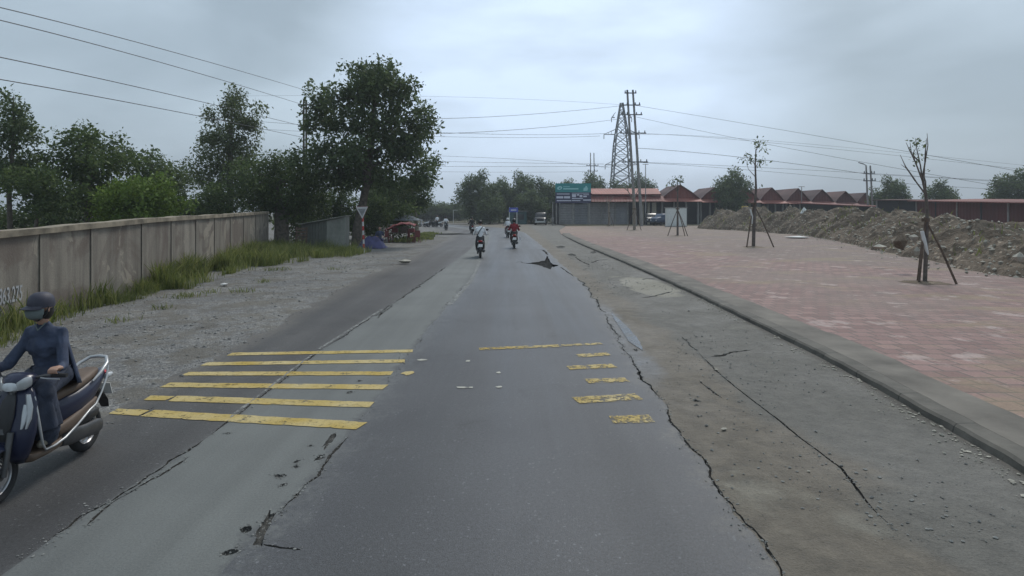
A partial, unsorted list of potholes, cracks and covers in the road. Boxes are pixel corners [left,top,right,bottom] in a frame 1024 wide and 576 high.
crack [542,250,783,576]
crack [87,458,187,525]
pothole [526,256,558,269]
